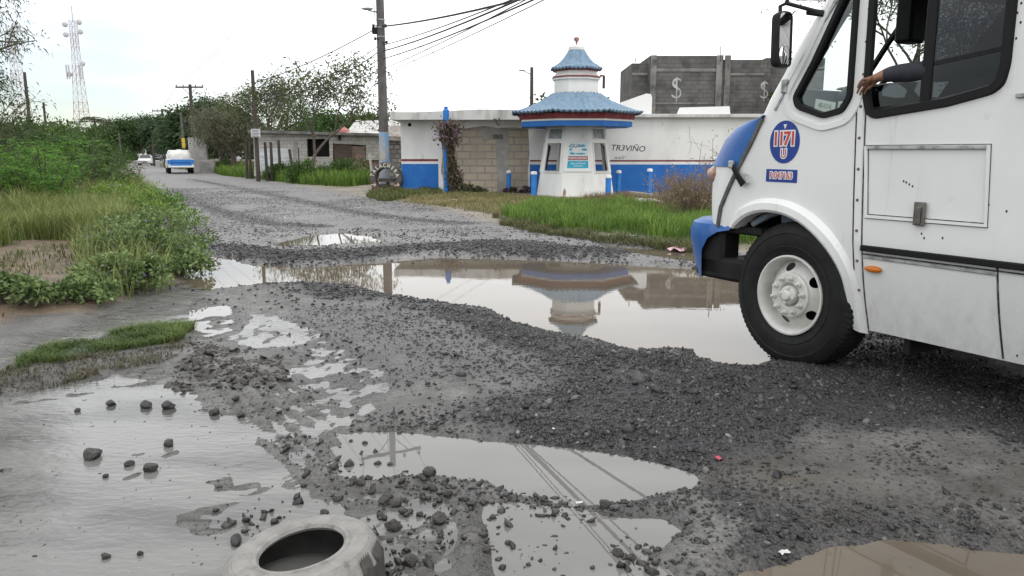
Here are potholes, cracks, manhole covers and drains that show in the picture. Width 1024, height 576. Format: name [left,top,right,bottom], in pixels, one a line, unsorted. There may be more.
pothole [715,522,1024,576]
pothole [319,423,719,515]
pothole [472,496,702,576]
pothole [175,252,779,365]
pothole [273,231,386,246]
